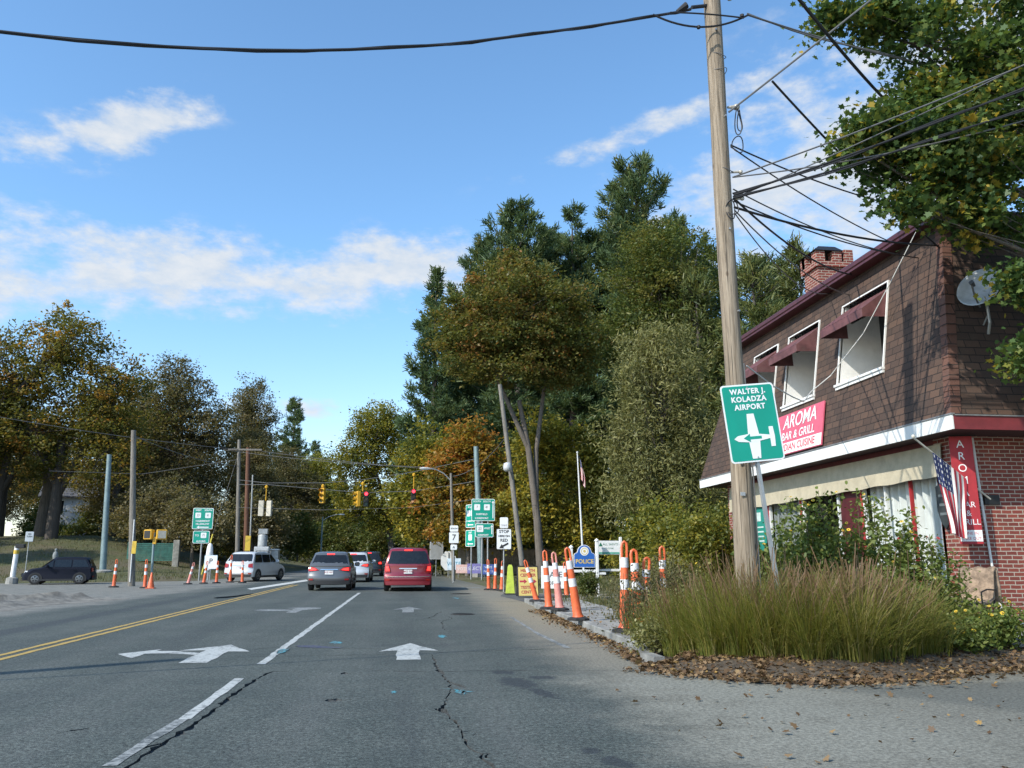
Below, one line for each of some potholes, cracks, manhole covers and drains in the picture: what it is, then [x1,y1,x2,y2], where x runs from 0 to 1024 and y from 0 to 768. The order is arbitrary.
crack [124,646,615,768]
